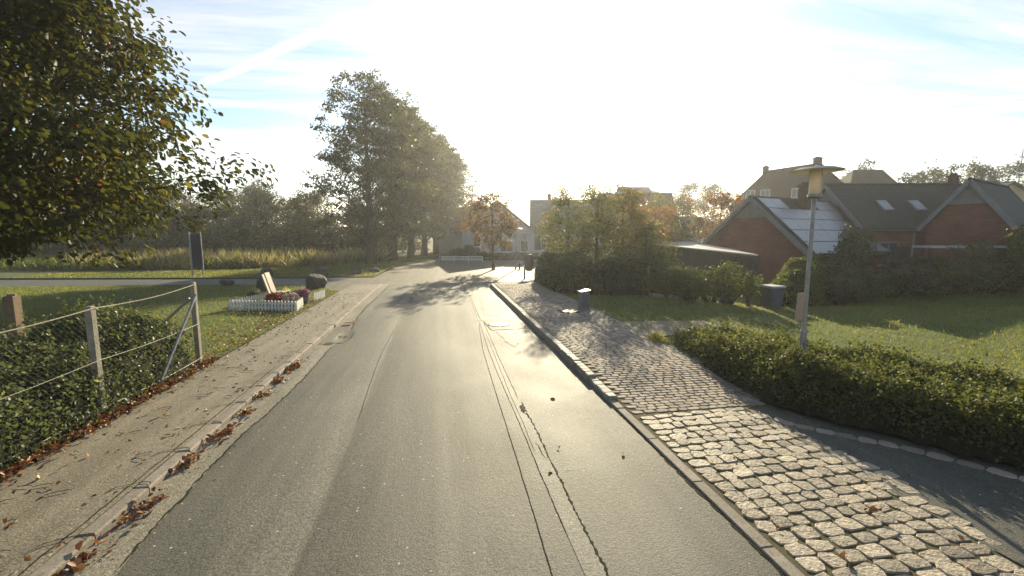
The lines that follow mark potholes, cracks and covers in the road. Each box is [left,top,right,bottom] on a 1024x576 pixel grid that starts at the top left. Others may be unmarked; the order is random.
crack [479,323,609,576]
